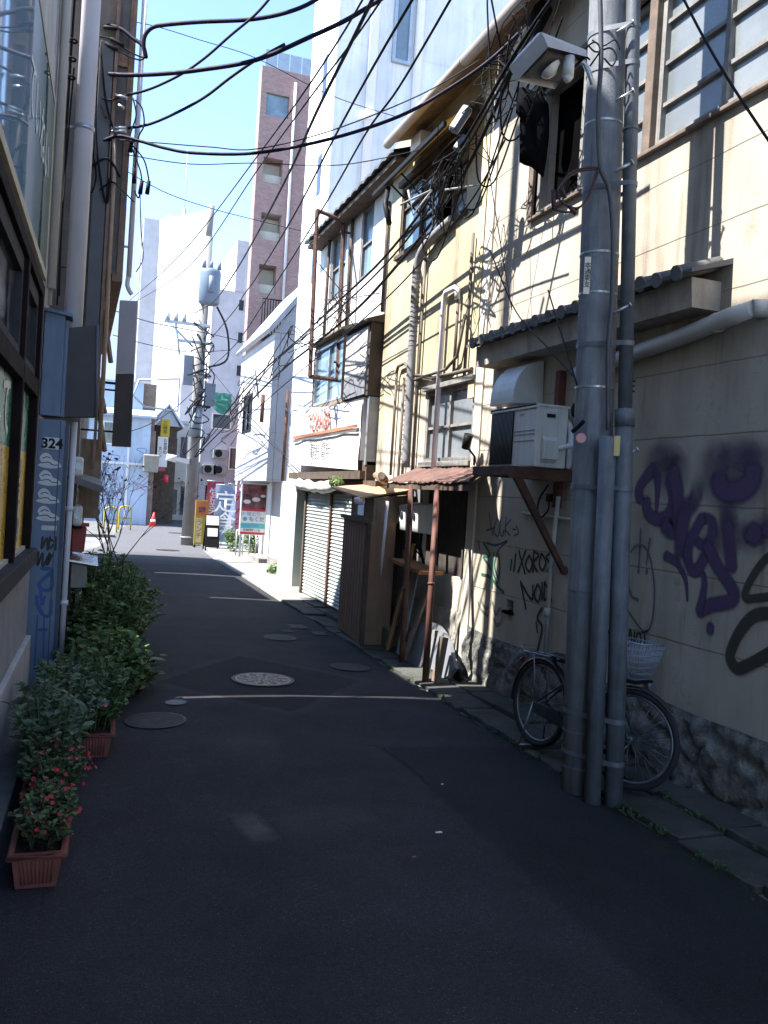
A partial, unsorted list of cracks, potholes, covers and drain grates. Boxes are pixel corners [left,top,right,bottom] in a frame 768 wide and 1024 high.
manhole cover [231,672,294,686]
manhole cover [330,663,370,671]
manhole cover [124,712,187,728]
